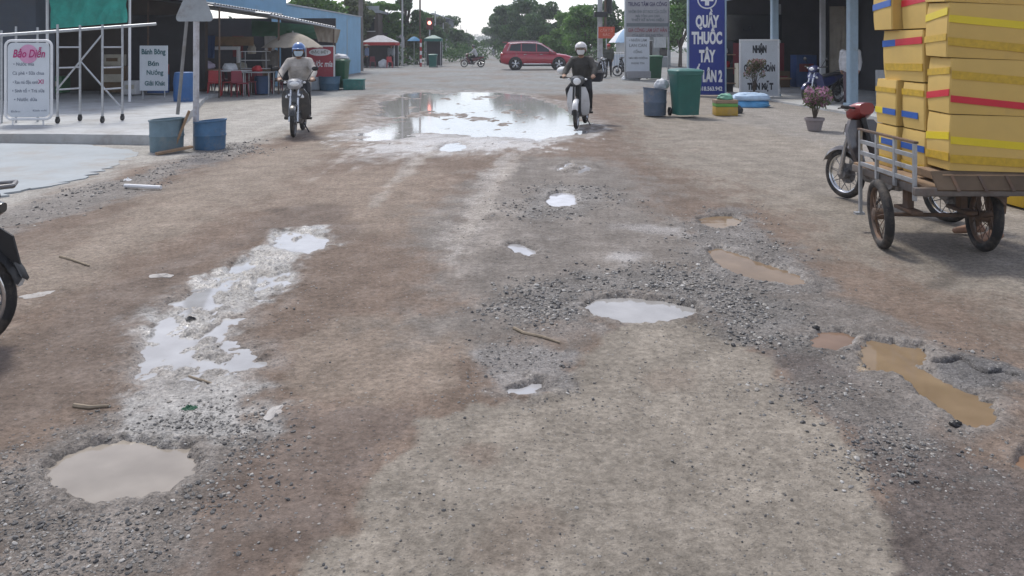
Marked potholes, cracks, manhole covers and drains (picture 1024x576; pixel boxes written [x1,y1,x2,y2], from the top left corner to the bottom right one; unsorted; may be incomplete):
pothole [843,331,1019,441]
pothole [426,140,476,153]
pothole [492,239,550,259]
pothole [254,226,343,258]
pothole [535,189,589,209]
pothole [686,212,752,231]
pothole [800,323,866,354]
pothole [322,89,624,145]
pothole [694,241,823,289]
pothole [547,160,602,175]
pothole [470,366,574,408]
pothole [17,426,232,520]
